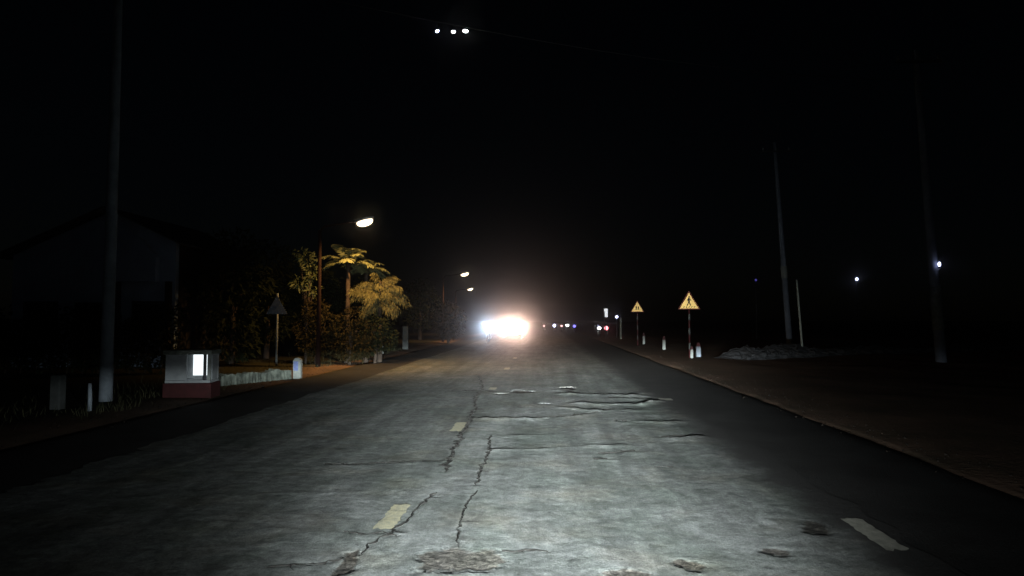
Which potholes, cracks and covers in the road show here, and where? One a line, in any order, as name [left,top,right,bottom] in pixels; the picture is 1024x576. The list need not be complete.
crack [344,492,437,554]
pothole [403,543,516,576]
pothole [757,547,792,556]
pothole [330,544,362,576]
crack [439,376,695,547]
pothole [670,558,707,572]
pothole [795,519,832,535]
